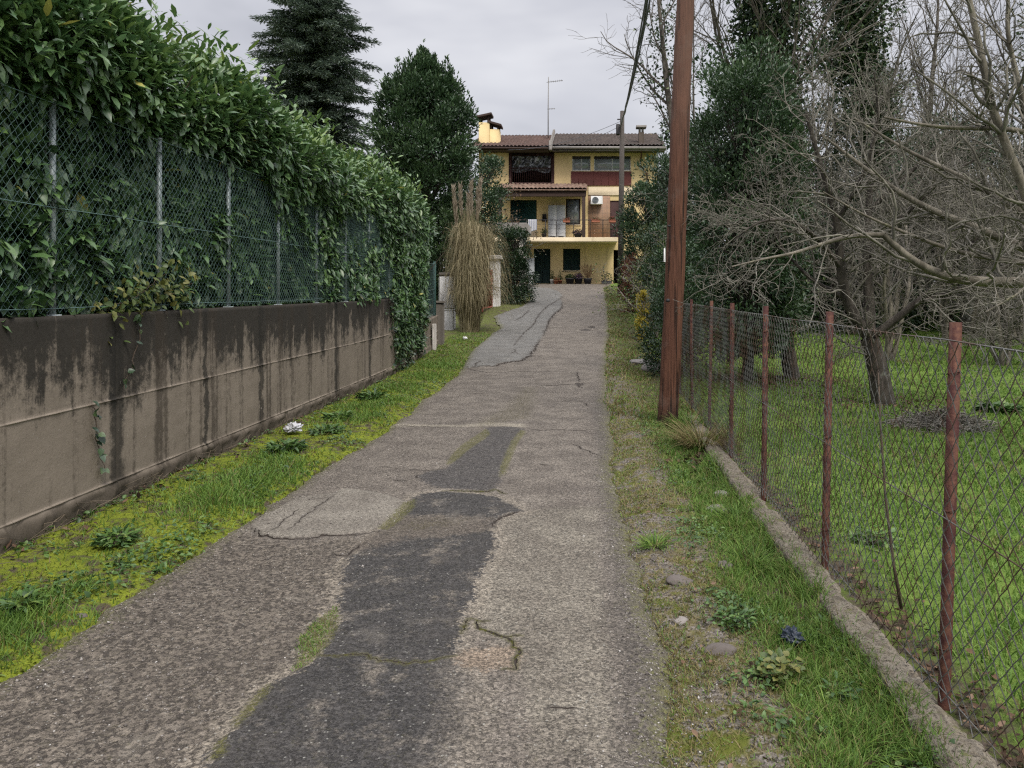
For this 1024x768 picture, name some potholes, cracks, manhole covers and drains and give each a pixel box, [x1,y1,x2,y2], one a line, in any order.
crack [461,618,522,670]
crack [251,495,374,556]
crack [465,297,588,406]
